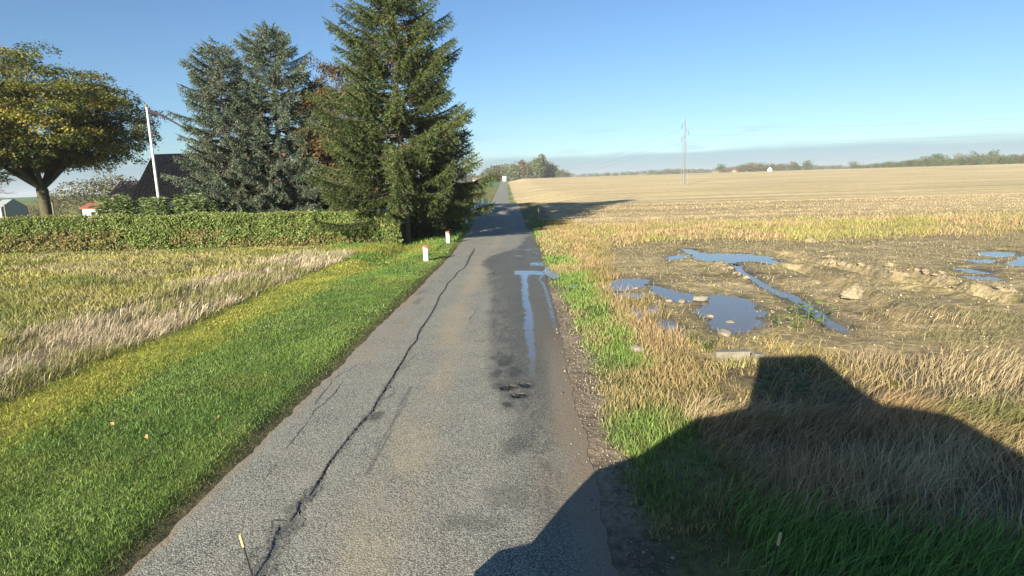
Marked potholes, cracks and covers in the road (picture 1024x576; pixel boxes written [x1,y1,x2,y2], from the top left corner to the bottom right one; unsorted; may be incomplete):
crack [251,249,475,576]
